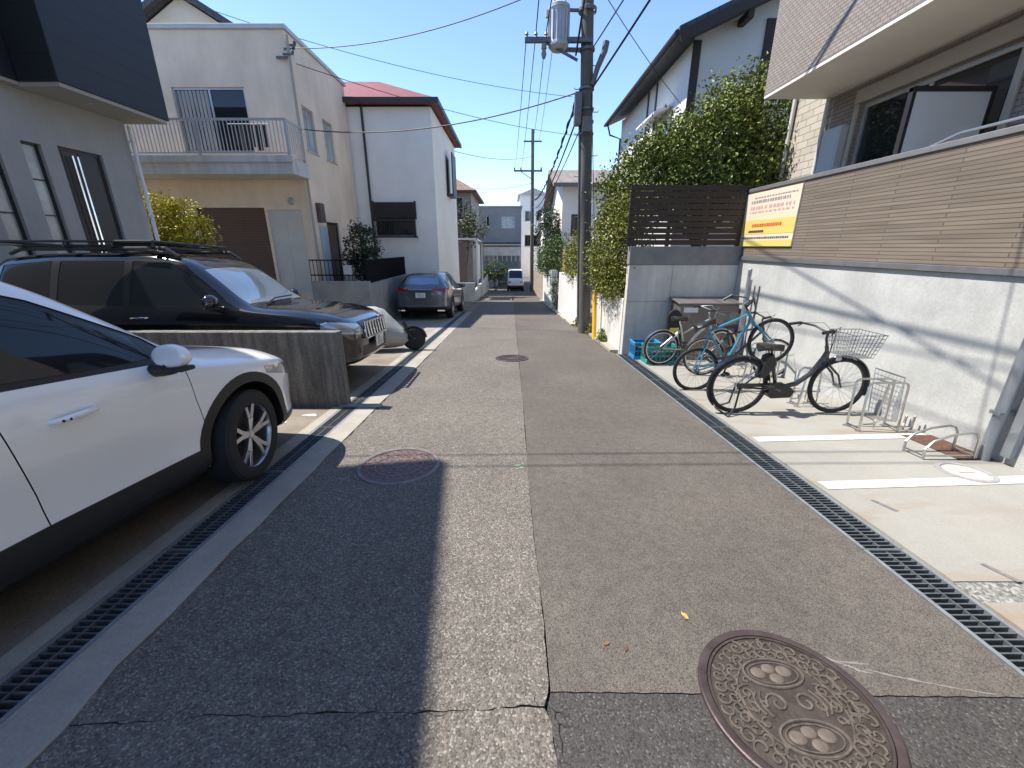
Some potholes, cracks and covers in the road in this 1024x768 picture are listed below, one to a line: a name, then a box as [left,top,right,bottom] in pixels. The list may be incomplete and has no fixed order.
drain grate [378,365,406,379]
drain grate [0,549,198,724]
drain grate [763,470,903,550]
drain grate [318,399,368,427]
manhole cover [356,448,440,486]
drain grate [630,365,663,380]
utility cover [933,461,1000,483]
drain grate [648,379,691,399]
manhole cover [698,630,911,768]
drain grate [266,427,336,471]
drain grate [616,354,643,365]
